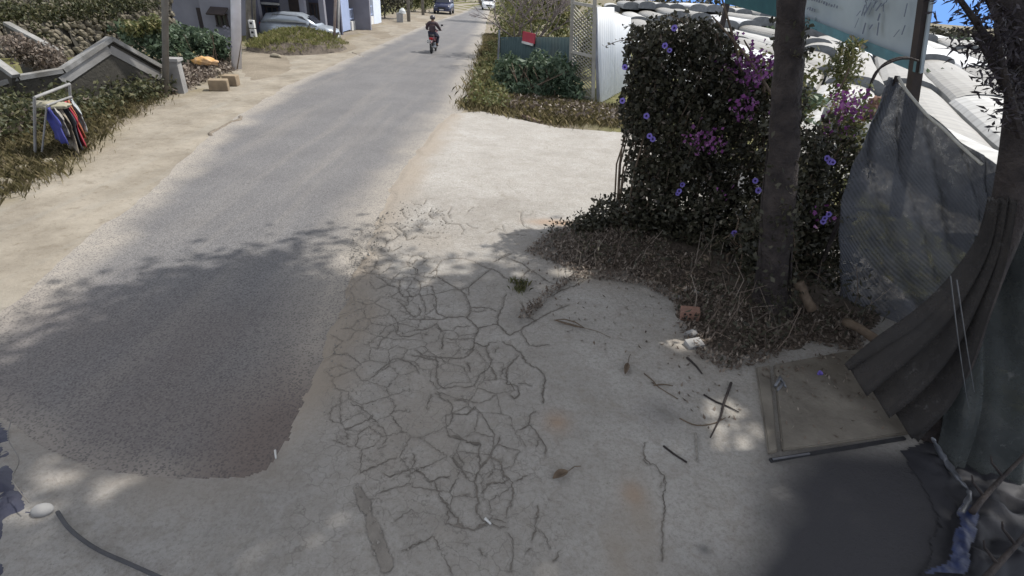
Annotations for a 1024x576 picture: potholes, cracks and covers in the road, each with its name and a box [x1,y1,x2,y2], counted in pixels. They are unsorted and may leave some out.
crack [340,201,537,292]
crack [643,444,667,560]
crack [324,253,592,573]
